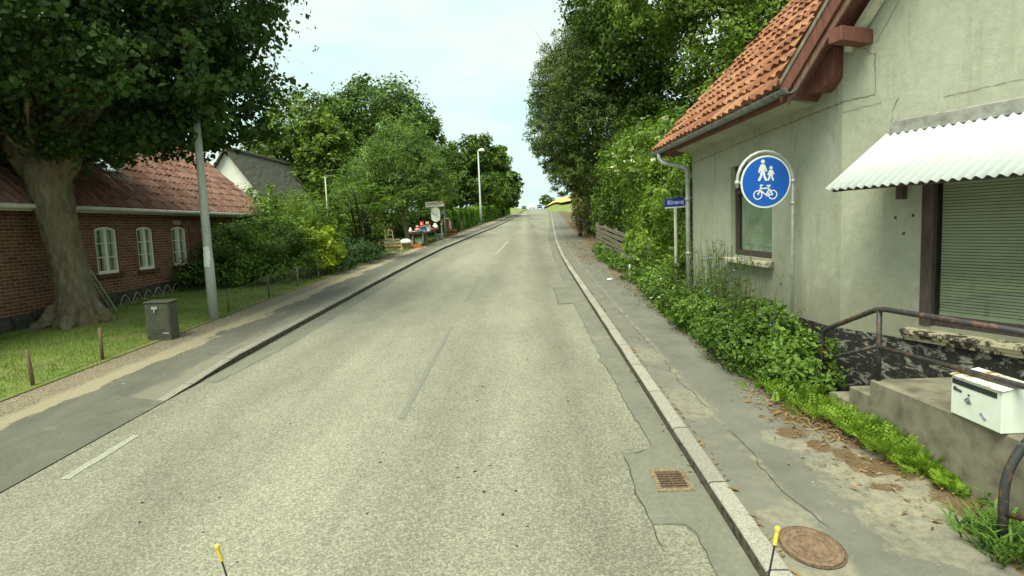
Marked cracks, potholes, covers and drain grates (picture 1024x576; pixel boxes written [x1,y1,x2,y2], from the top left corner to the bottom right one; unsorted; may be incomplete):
manhole cover [778,526,848,569]
drain grate [648,468,696,492]
